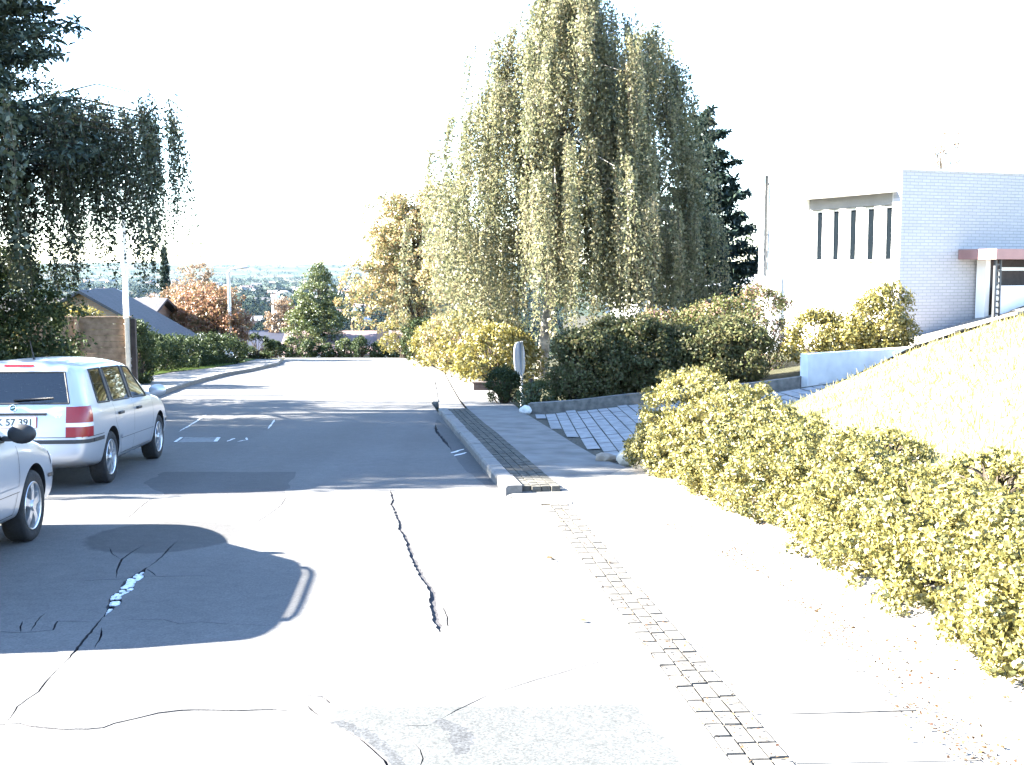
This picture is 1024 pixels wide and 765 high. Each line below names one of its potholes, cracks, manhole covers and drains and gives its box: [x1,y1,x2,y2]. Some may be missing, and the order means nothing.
crack [390,491,448,632]
crack [445,658,616,717]
crack [0,543,427,765]
